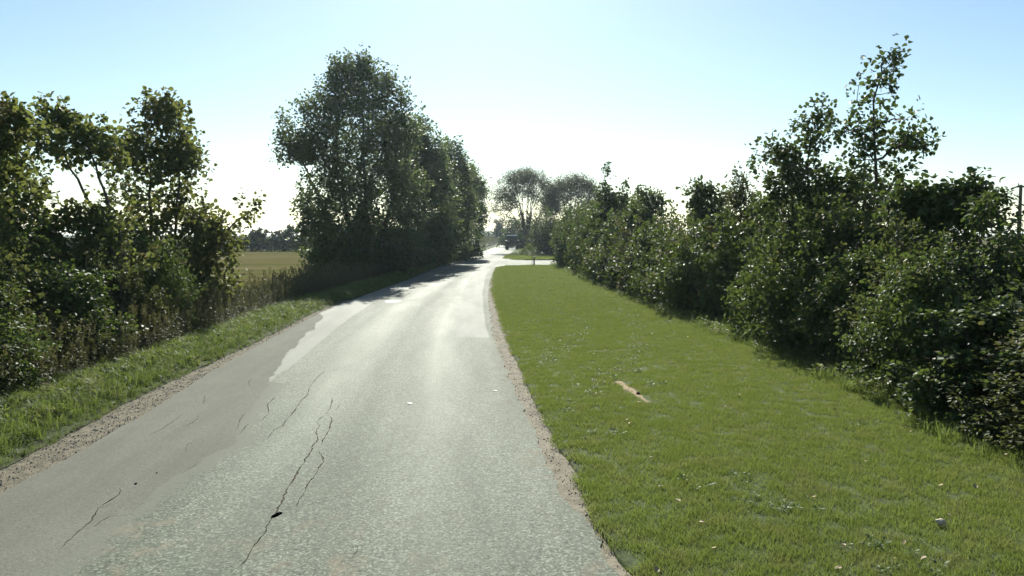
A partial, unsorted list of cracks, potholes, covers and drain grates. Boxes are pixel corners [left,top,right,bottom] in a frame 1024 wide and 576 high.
crack [263,375,320,436]
crack [232,400,339,571]
crack [59,485,126,550]
